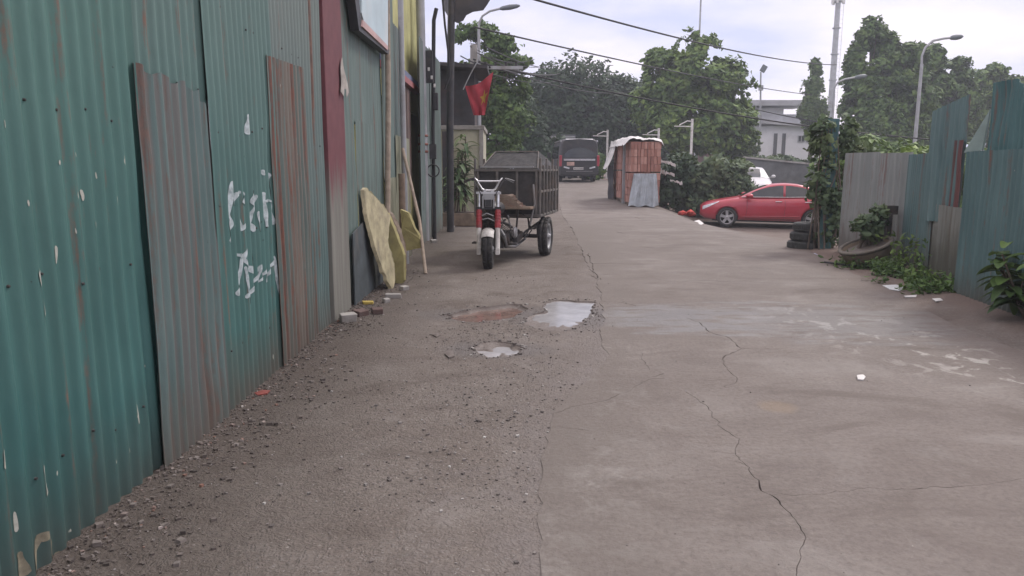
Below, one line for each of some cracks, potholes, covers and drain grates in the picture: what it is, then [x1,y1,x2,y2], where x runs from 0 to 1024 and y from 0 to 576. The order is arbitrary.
pothole [447,304,529,322]
crack [688,318,777,387]
pothole [475,341,522,358]
crack [686,392,1017,576]
pothole [524,300,596,331]
